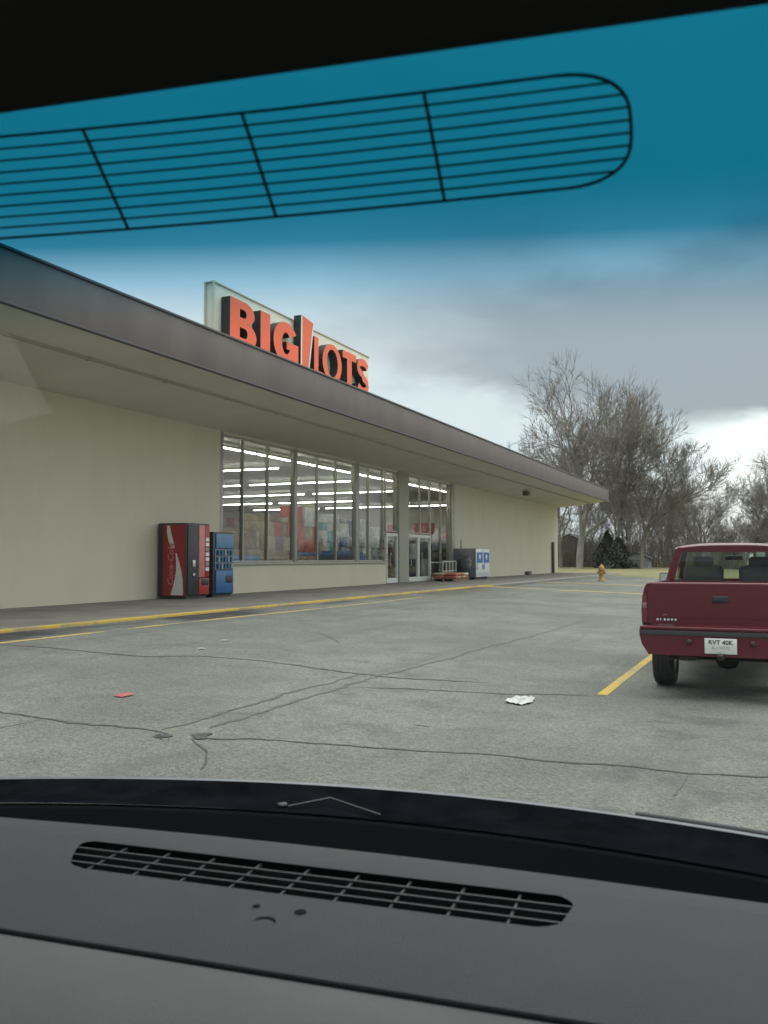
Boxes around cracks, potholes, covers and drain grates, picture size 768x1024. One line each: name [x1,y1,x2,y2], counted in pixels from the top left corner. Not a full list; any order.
crack [0,619,768,796]
